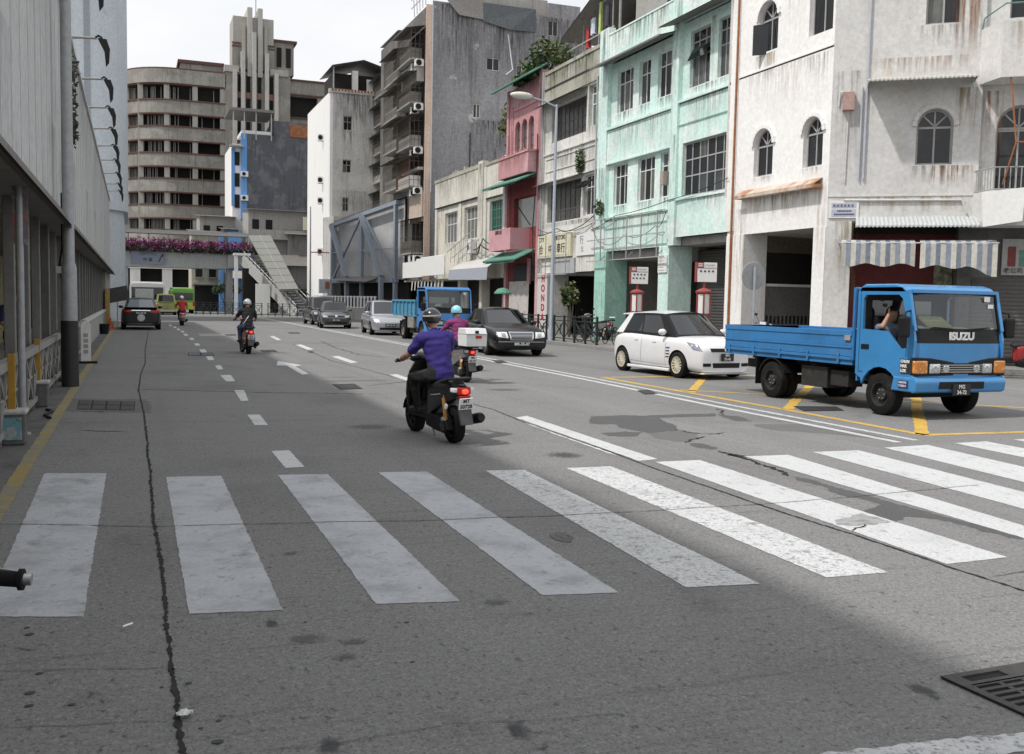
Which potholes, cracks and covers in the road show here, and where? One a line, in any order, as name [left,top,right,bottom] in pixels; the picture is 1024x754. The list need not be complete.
drain grate [941,662,1024,716]
